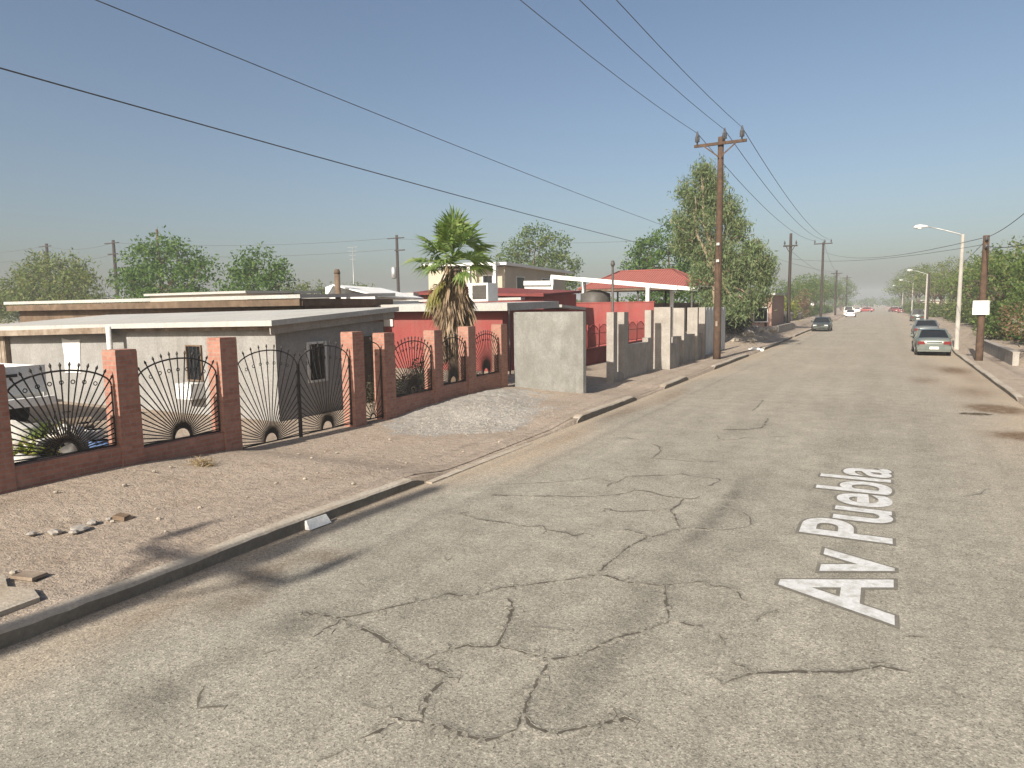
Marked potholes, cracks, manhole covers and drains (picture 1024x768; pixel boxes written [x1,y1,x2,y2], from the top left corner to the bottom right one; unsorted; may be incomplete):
crack [190,685,228,712]
crack [261,400,912,765]
